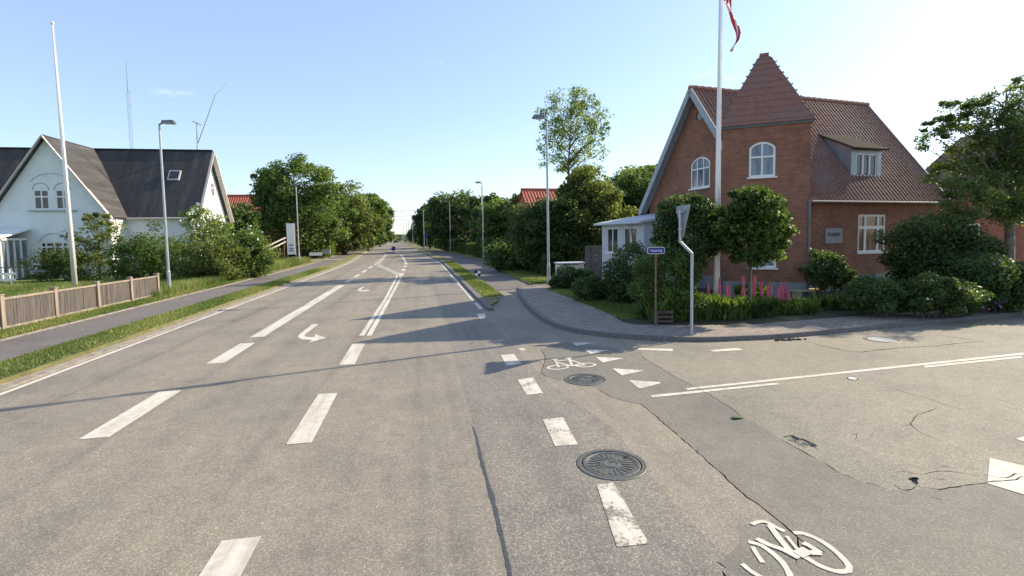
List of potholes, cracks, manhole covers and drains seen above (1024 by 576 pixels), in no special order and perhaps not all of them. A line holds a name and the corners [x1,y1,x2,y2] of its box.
manhole cover [576,449,648,481]
pothole [784,435,817,448]
crack [540,352,1020,576]
manhole cover [564,373,607,386]
